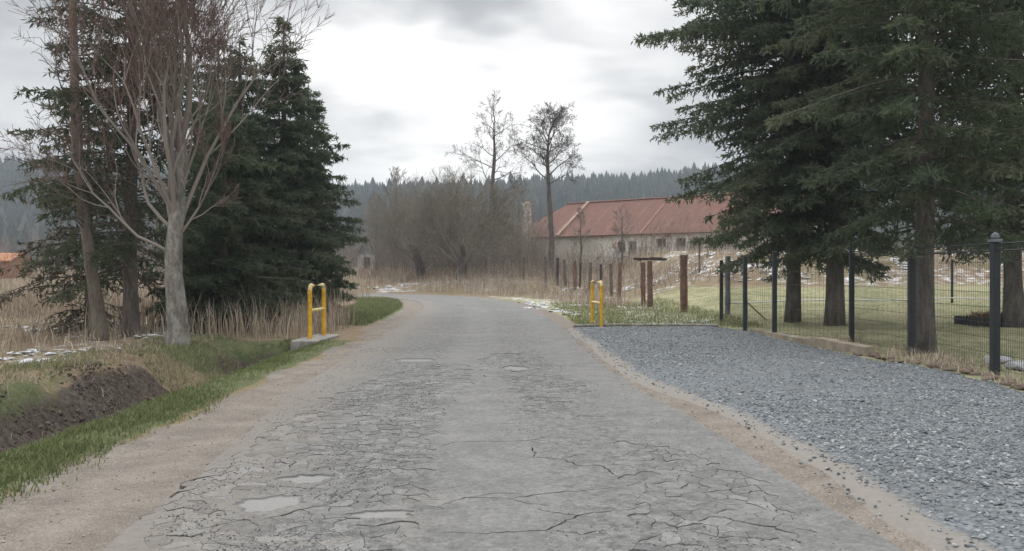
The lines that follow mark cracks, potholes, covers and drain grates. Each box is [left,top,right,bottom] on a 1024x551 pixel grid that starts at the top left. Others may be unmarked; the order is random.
pothole [274,474,335,483]
pothole [232,494,307,512]
crack [139,353,817,551]
